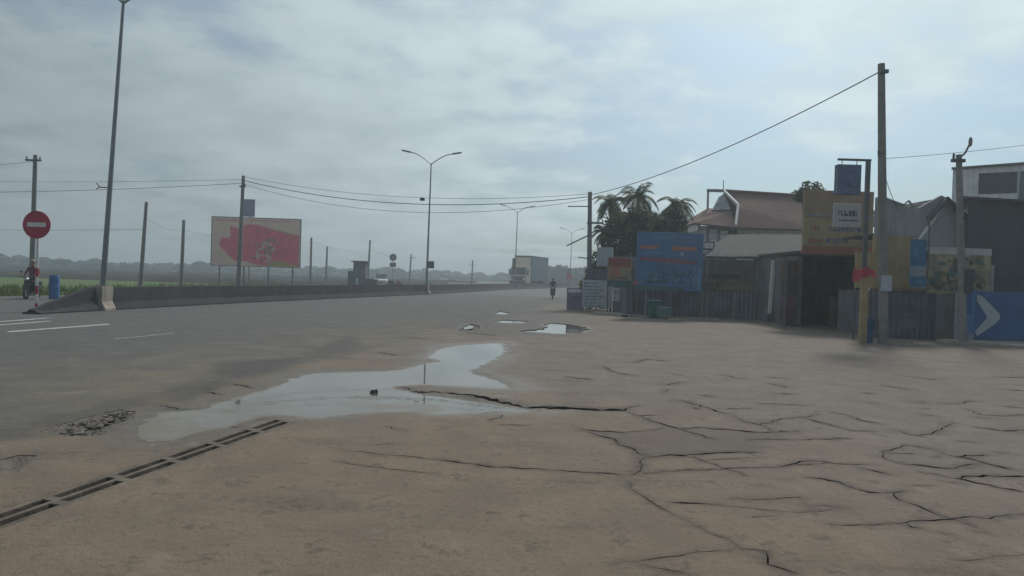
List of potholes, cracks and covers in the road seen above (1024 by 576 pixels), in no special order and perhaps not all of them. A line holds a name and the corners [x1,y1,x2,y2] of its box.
pothole [41,410,136,436]
crack [338,359,1024,574]
